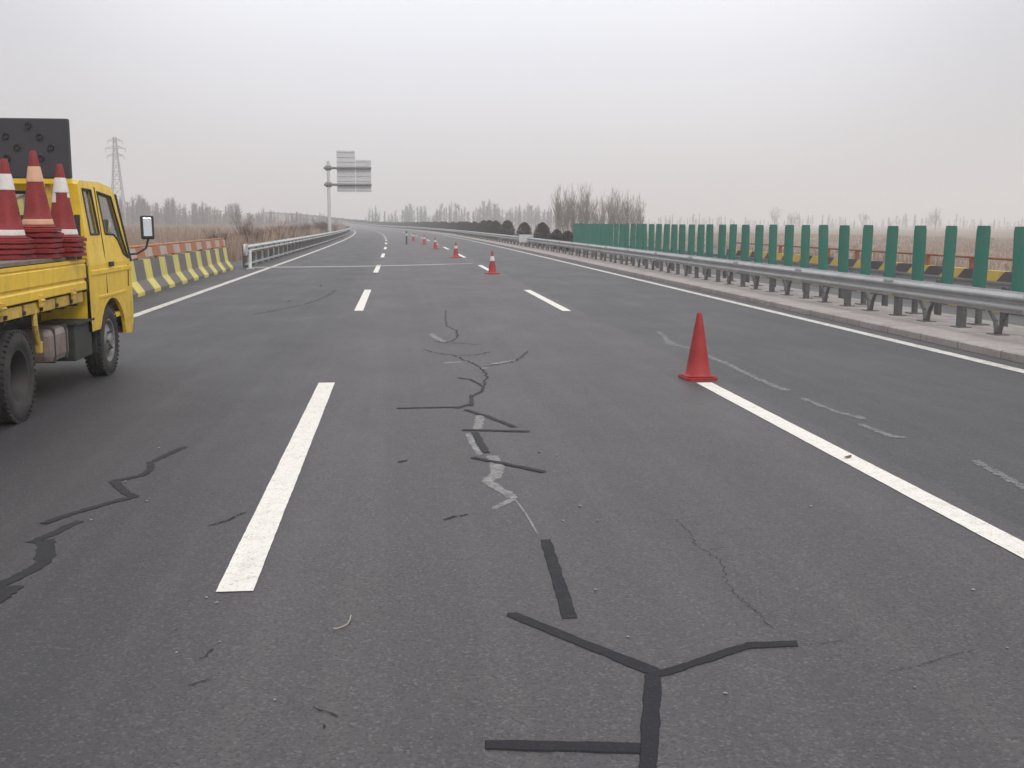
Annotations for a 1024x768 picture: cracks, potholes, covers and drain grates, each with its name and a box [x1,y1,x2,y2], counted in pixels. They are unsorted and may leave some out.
crack [676,520,771,626]
crack [657,331,905,438]
crack [971,460,1024,489]
